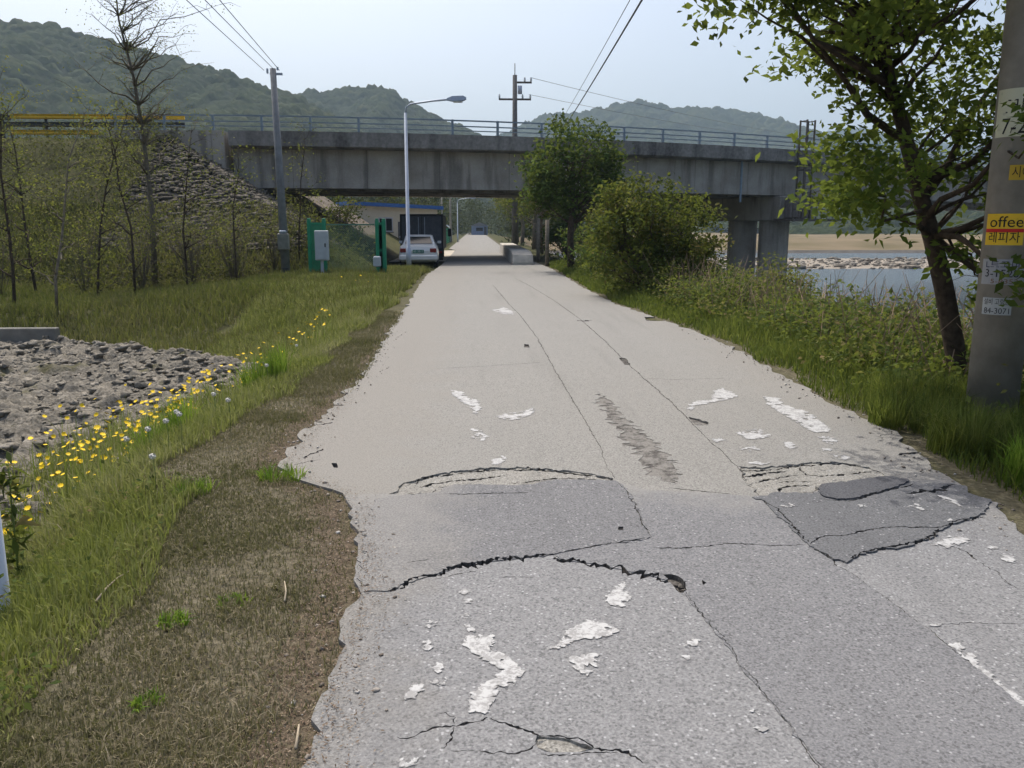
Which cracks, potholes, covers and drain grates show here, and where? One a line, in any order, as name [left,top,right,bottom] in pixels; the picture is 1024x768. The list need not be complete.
crack [749,462,956,501]
crack [390,516,1023,680]
crack [413,468,610,495]
crack [398,712,643,763]
